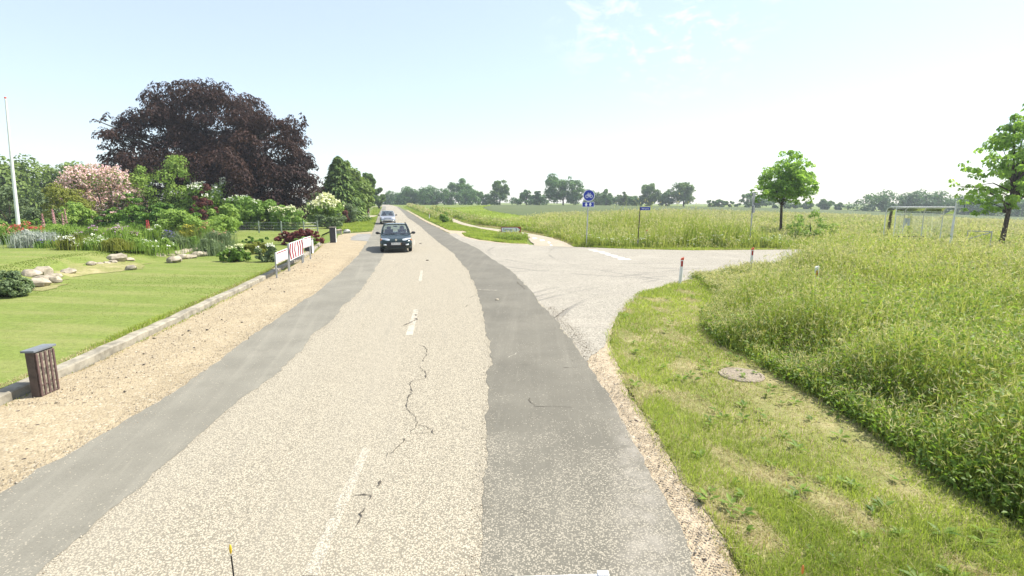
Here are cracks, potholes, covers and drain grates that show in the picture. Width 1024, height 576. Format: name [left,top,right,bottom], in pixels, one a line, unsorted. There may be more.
manhole cover [718,367,765,383]
crack [387,346,433,454]
crack [352,480,382,526]
